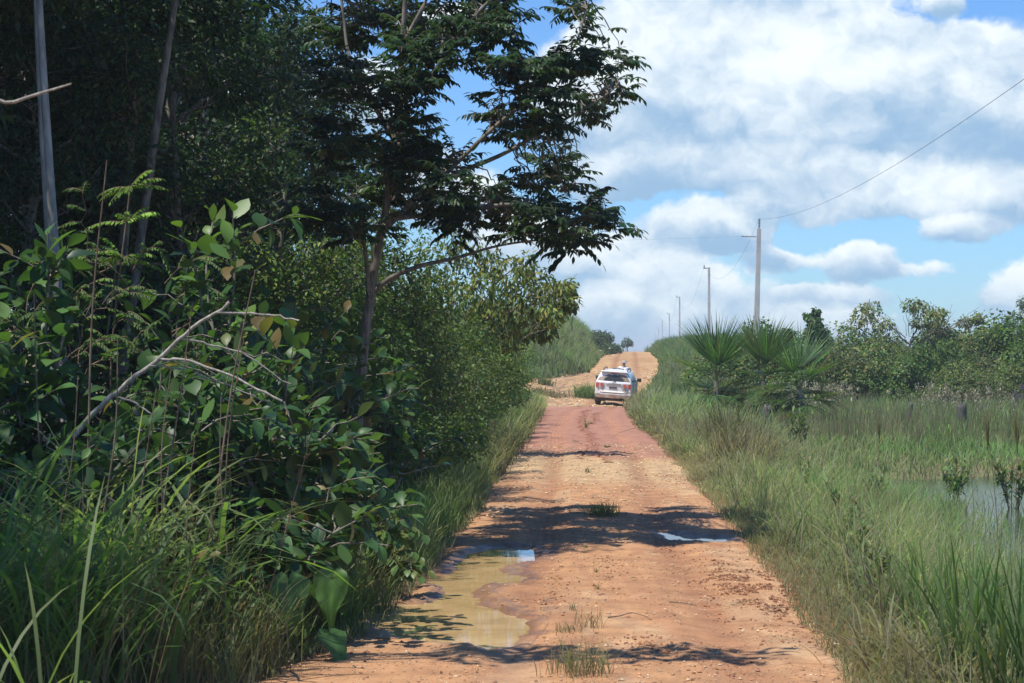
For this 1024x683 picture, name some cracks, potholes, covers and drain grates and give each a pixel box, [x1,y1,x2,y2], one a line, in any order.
pothole [357,541,550,653]
pothole [645,530,747,543]
